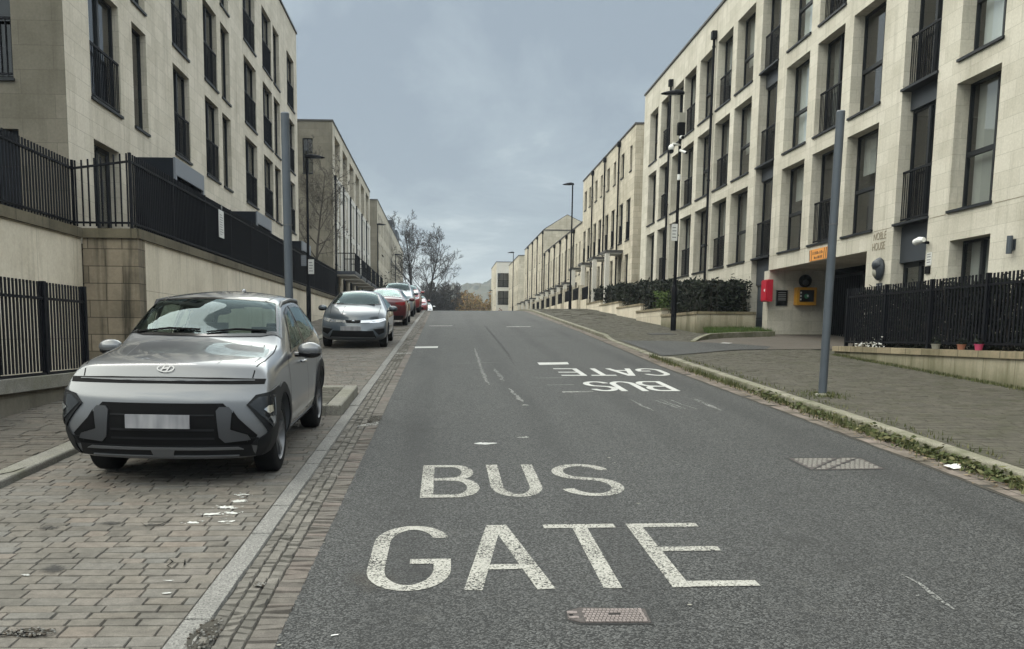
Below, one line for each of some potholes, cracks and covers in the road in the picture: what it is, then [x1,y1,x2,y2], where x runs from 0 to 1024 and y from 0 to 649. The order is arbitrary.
manhole cover [564,607,654,625]
manhole cover [784,457,887,471]
